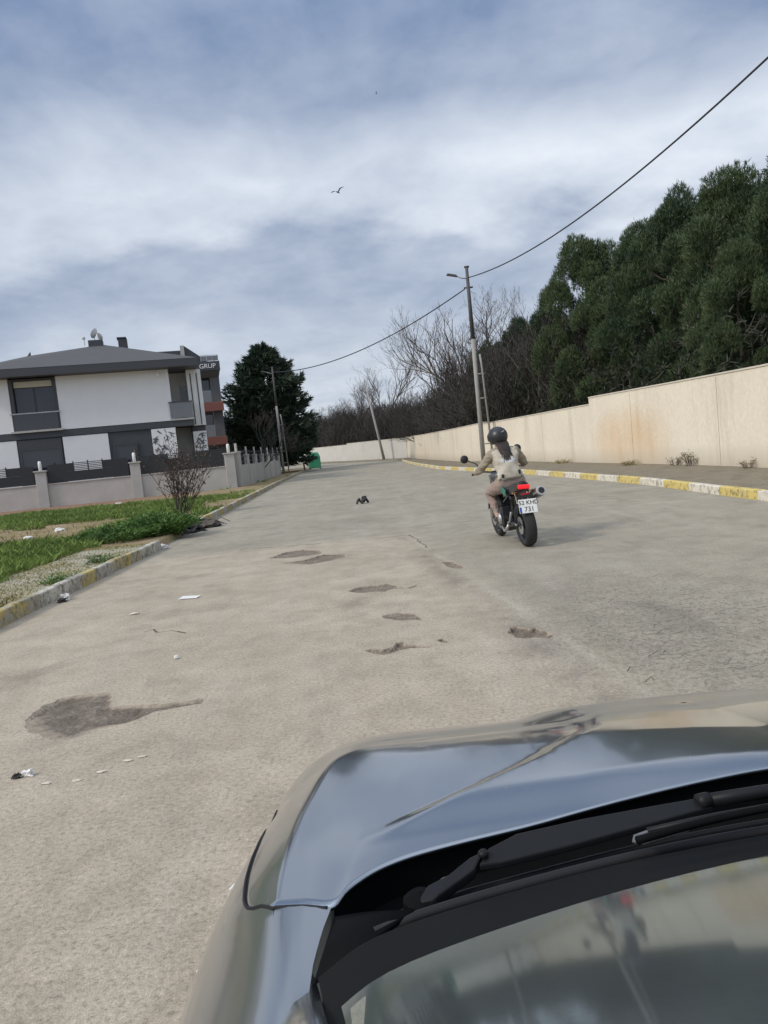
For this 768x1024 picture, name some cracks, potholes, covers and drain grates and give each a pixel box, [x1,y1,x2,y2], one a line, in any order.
pothole [365,642,432,655]
pothole [348,583,418,593]
pothole [269,549,323,559]
pothole [508,626,554,638]
pothole [285,554,348,565]
pothole [382,612,423,621]
